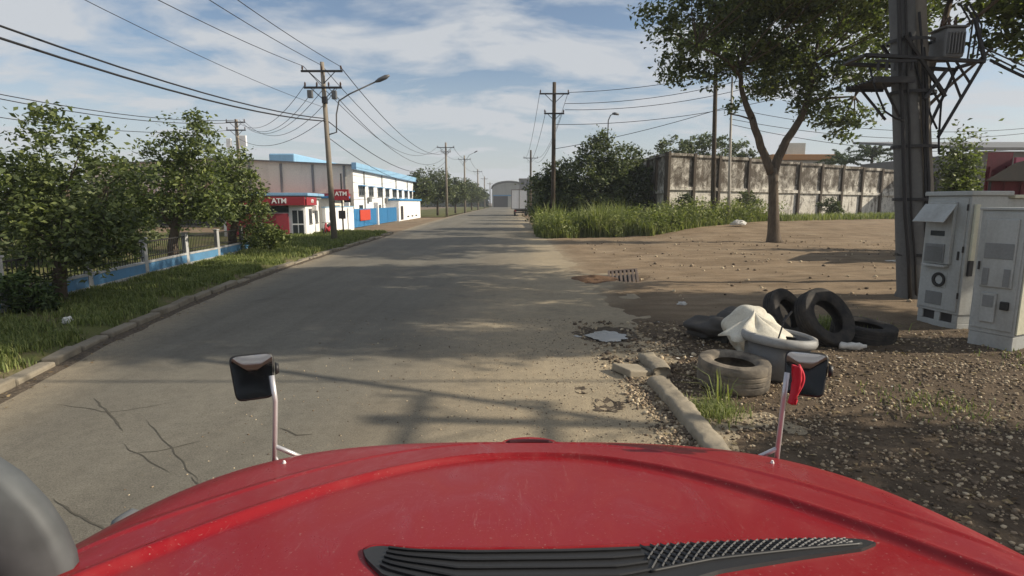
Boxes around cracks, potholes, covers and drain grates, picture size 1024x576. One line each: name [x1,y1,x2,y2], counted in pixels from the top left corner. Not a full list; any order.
crack [58,398,203,484]
pothole [593,397,627,413]
drain grate [608,268,639,282]
crack [53,498,105,529]
pothole [571,326,638,344]
